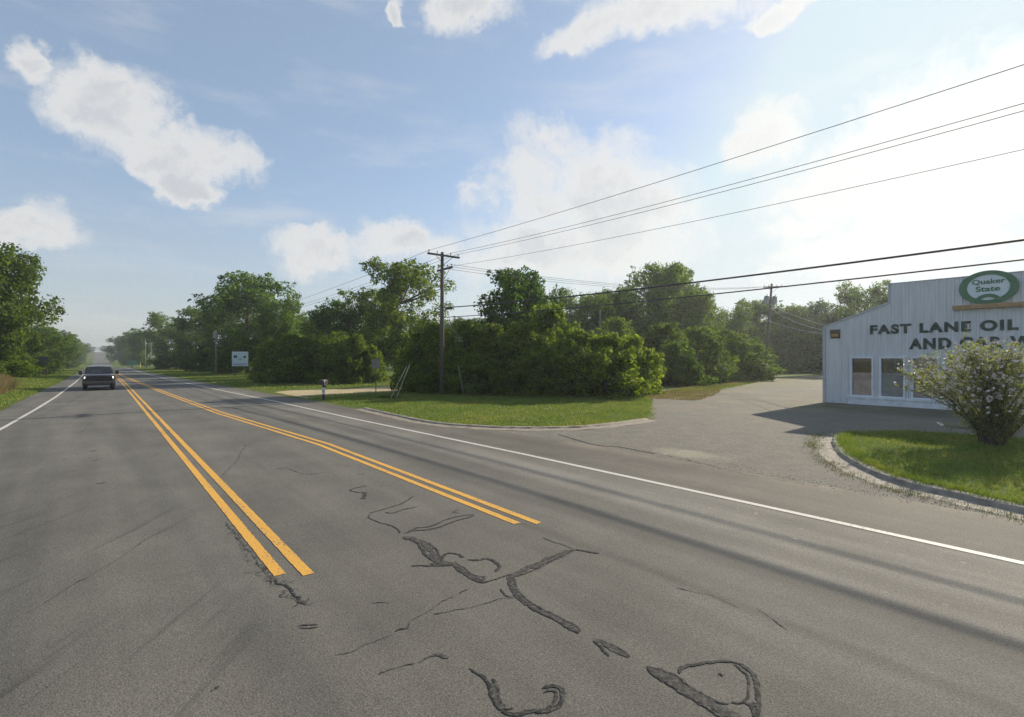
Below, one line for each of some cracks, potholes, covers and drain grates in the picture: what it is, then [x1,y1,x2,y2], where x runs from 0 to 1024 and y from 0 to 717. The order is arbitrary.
crack [379,653,449,674]
crack [226,522,315,607]
crack [336,589,467,655]
crack [350,473,418,533]
